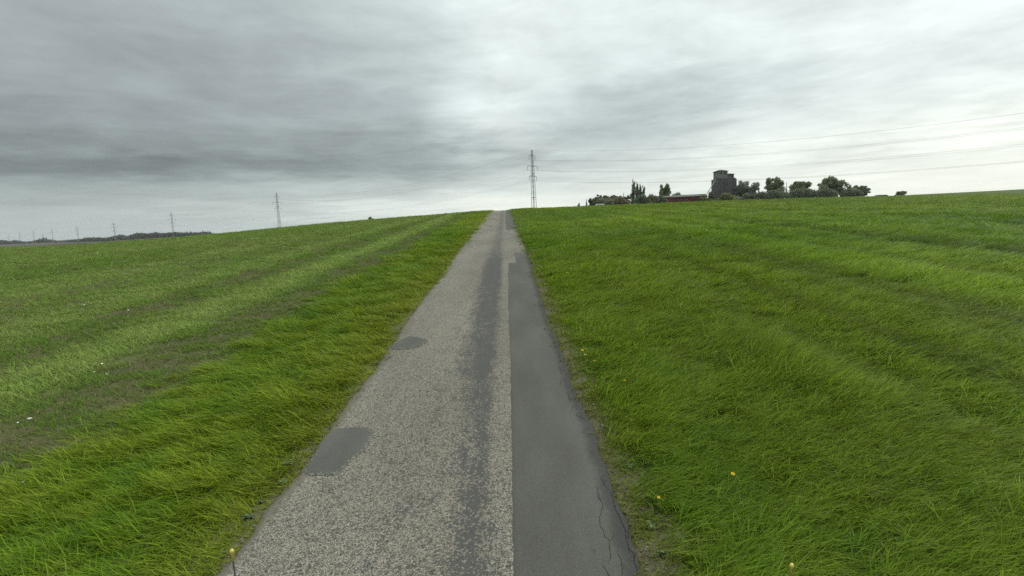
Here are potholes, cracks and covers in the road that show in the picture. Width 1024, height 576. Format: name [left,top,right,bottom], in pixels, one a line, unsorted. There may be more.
crack [592,480,638,575]
